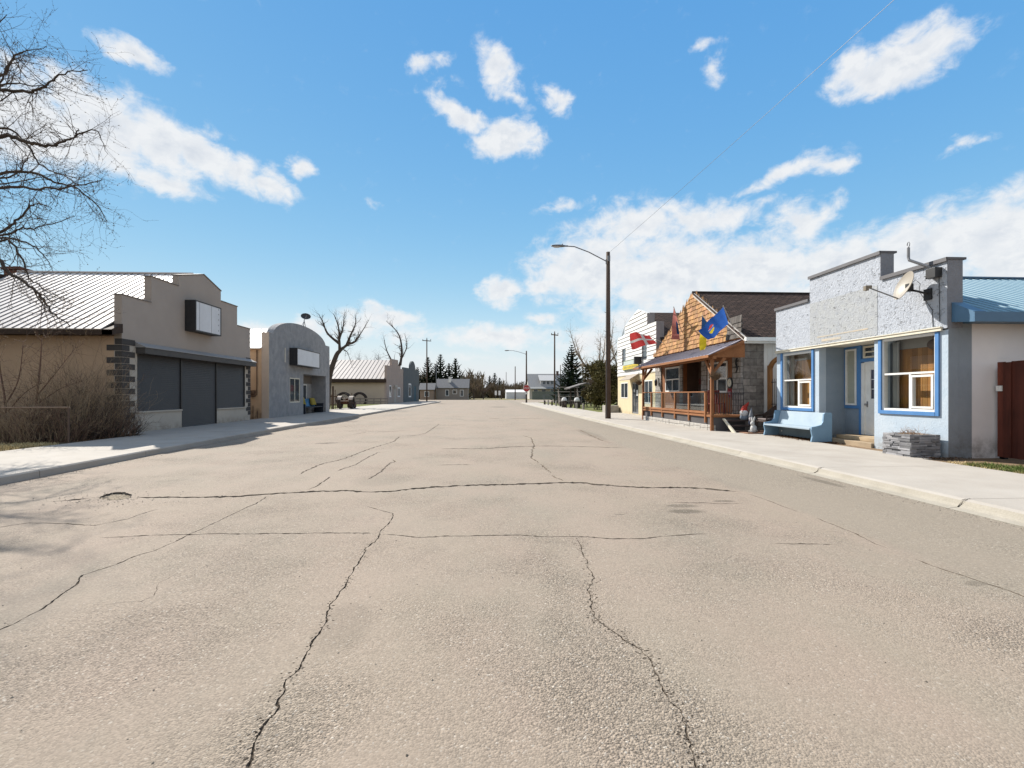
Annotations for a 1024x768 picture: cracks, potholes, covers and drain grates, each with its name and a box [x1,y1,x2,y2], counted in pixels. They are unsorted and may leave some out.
crack [0,424,738,768]
pothole [100,492,132,500]
crack [750,494,1024,597]
